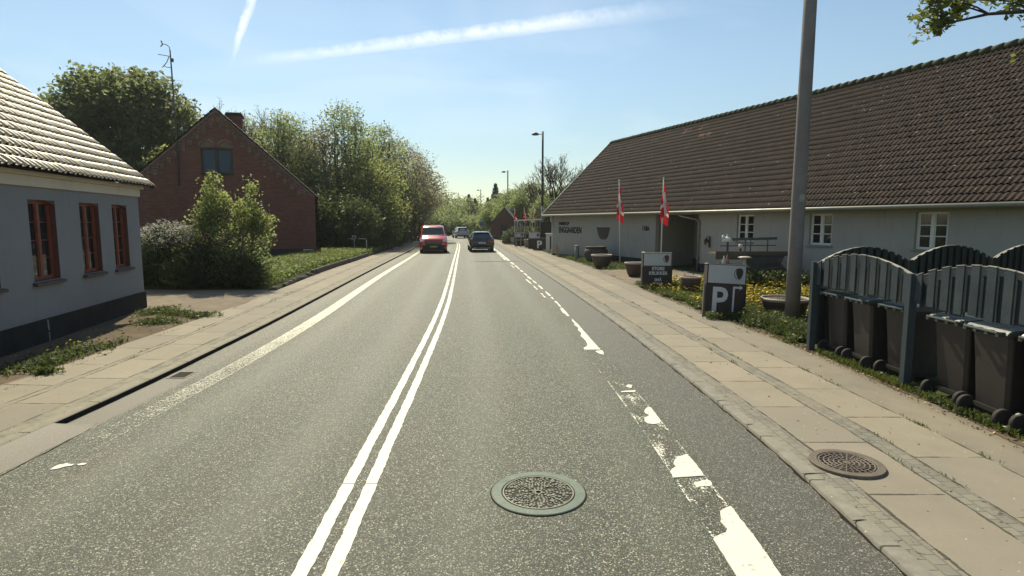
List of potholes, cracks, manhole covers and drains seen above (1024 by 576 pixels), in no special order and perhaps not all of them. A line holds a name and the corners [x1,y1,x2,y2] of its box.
manhole cover [490,472,587,516]
manhole cover [808,449,887,480]
drain grate [166,371,198,379]
